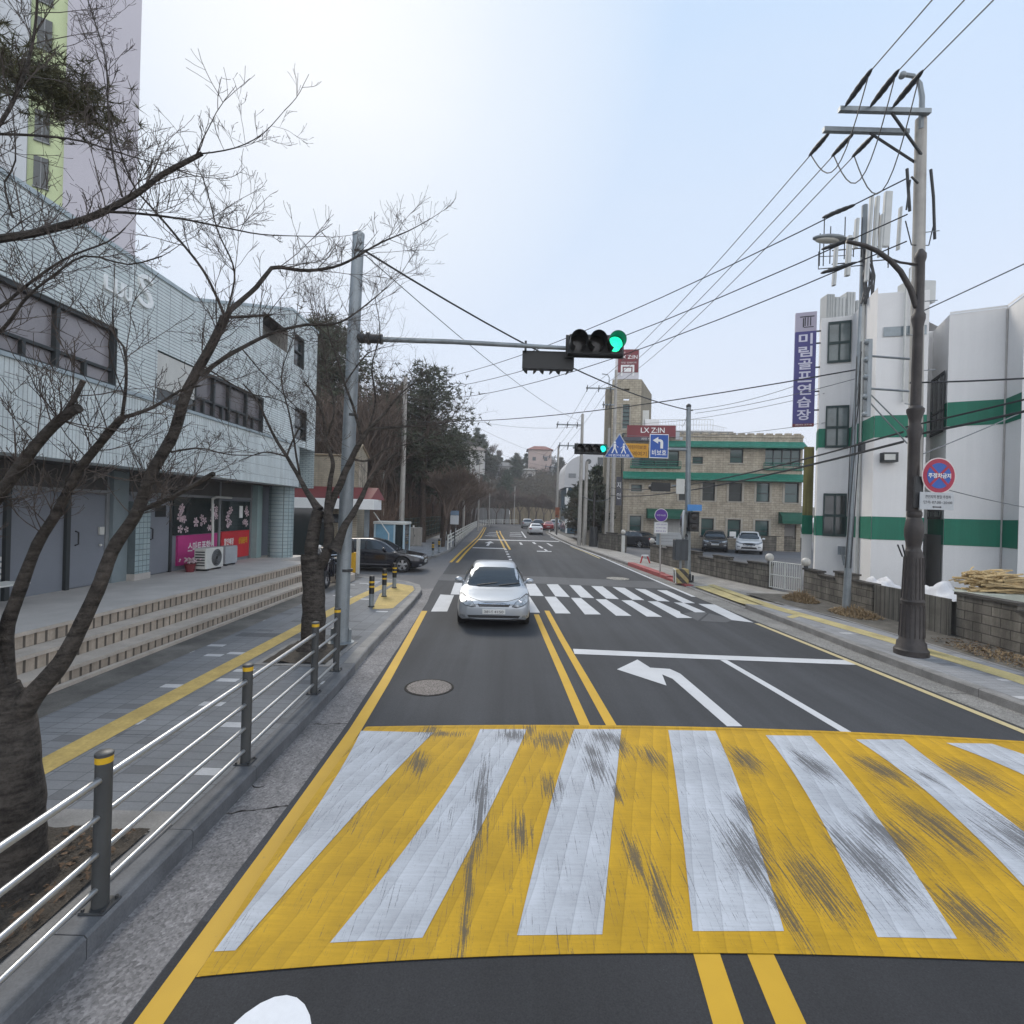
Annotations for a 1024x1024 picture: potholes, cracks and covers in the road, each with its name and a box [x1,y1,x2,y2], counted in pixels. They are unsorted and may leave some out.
manhole cover [404,679,454,696]
